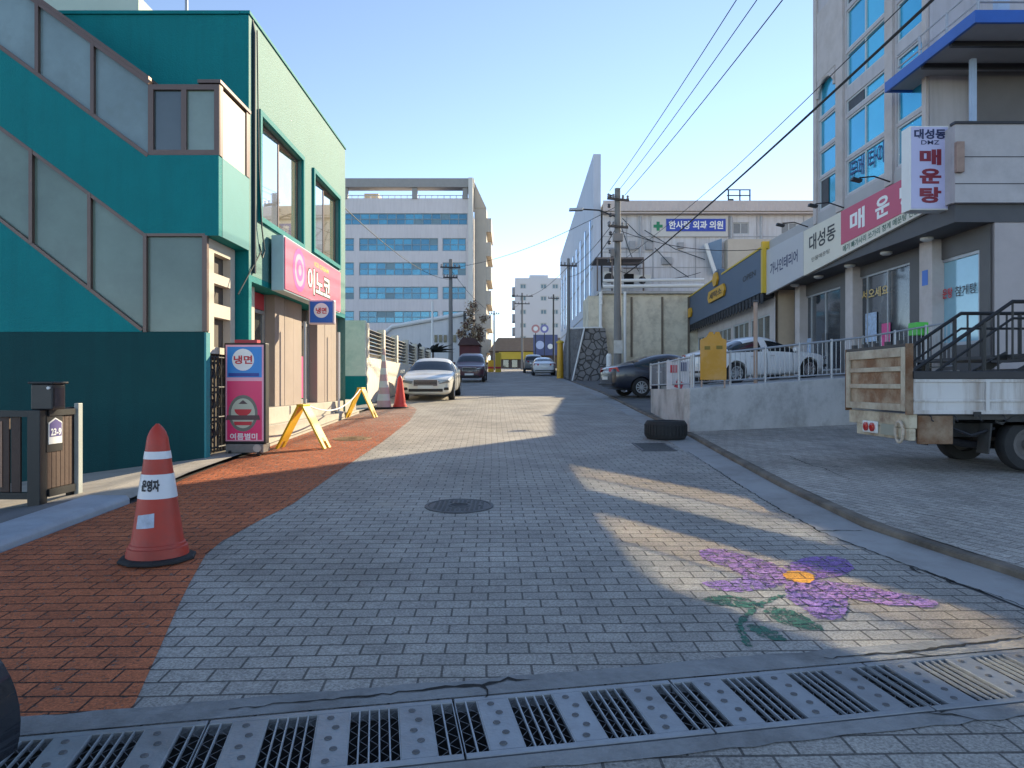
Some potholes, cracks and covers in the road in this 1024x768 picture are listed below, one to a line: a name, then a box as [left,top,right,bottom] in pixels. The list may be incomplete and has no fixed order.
drain grate [189,699,465,768]
crack [824,636,1024,659]
drain grate [454,680,715,760]
manhole cover [425,498,494,514]
manhole cover [632,443,677,451]
drain grate [670,663,935,734]
drain grate [0,720,209,768]
drain grate [863,649,1024,711]
